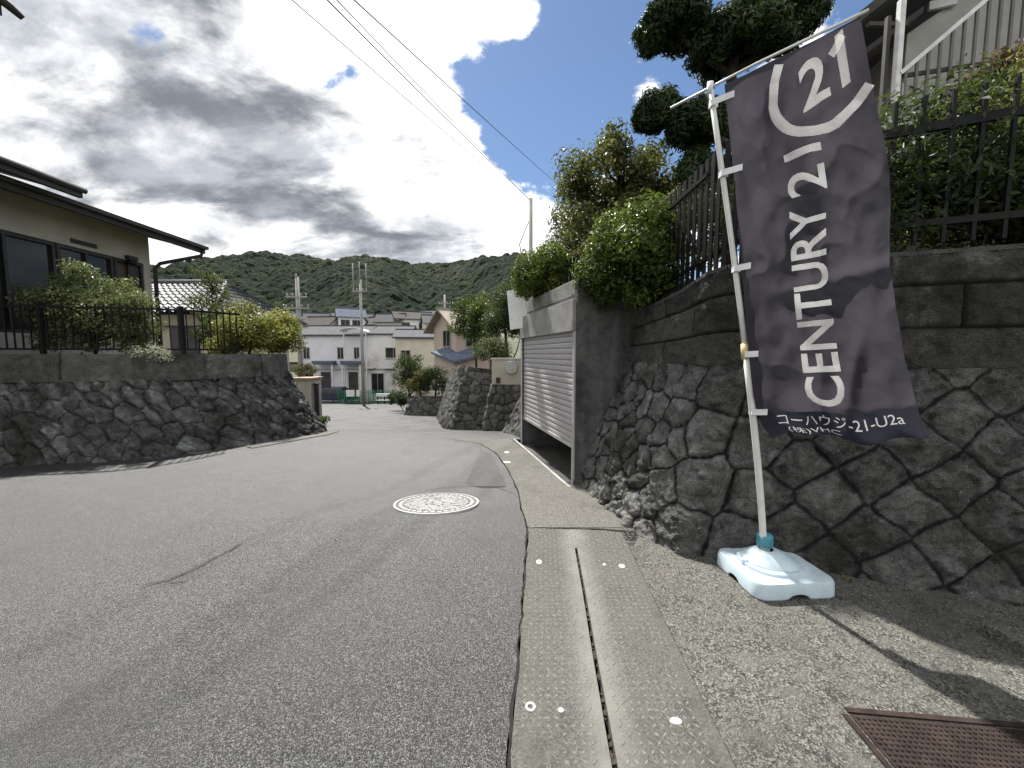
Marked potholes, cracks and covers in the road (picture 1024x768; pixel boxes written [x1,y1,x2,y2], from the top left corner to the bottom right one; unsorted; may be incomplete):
crack [138,543,242,587]
manhole cover [393,493,479,515]
